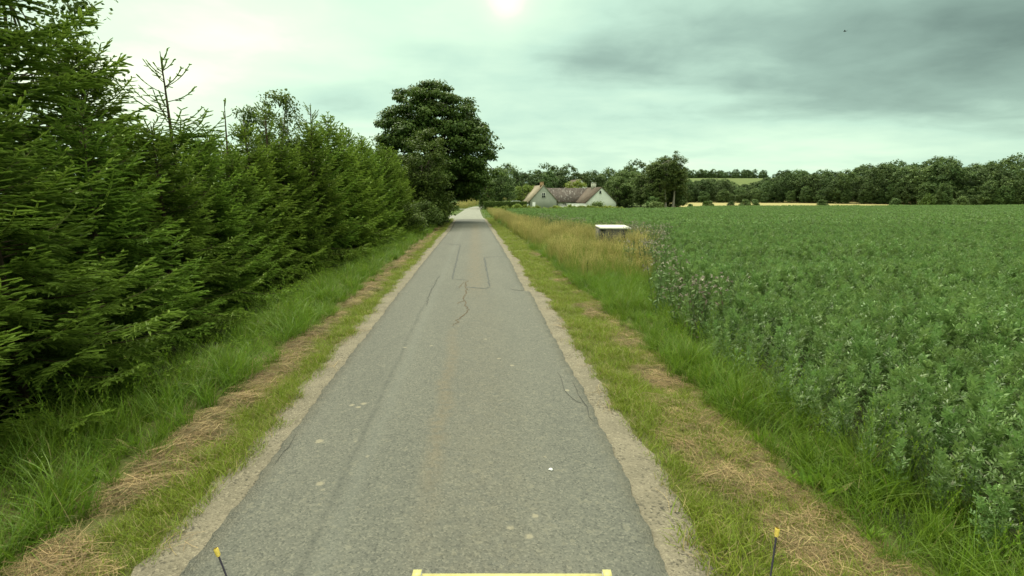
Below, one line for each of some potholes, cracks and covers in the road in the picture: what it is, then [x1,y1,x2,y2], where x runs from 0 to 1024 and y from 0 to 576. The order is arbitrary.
crack [453,280,469,325]
